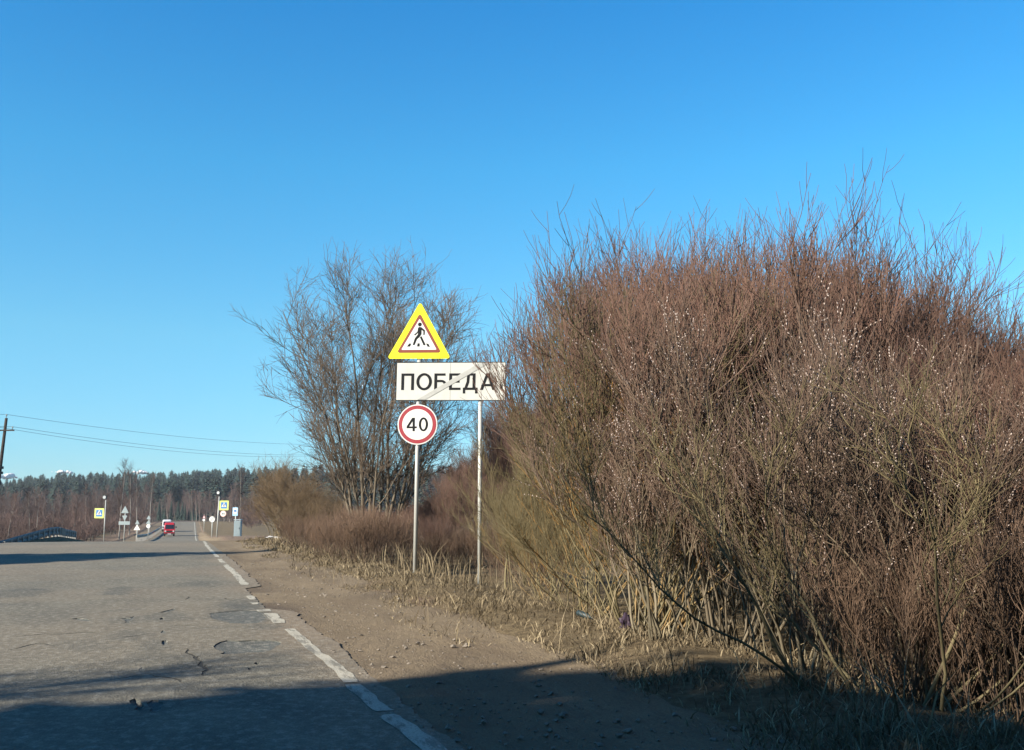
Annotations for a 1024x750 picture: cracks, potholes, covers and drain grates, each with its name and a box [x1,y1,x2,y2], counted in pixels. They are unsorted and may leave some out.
crack [116,649,209,684]
pothole [129,698,145,710]
